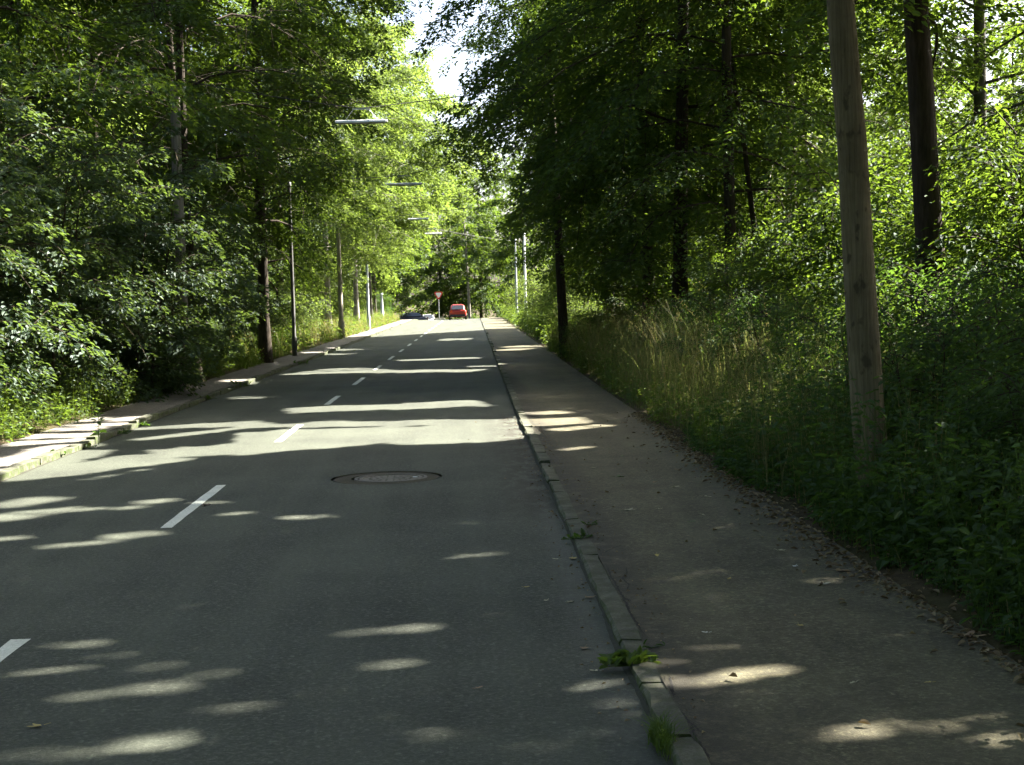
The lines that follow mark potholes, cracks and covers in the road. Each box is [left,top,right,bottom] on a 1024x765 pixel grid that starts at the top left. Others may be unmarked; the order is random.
manhole cover [333,472,441,485]
